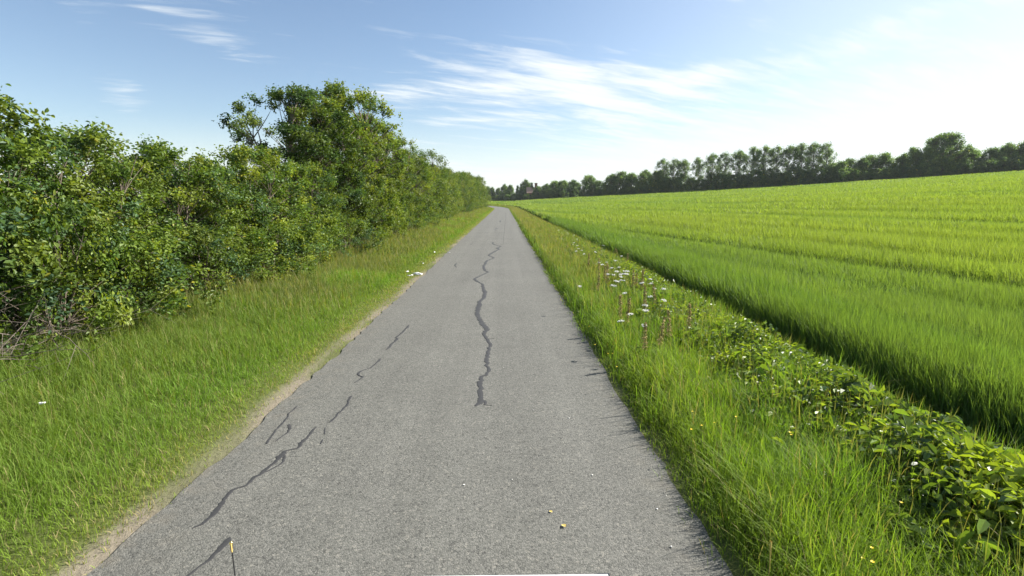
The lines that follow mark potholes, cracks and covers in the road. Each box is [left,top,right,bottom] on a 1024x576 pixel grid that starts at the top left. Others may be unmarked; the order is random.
crack [454,219,506,406]
crack [186,325,409,576]
